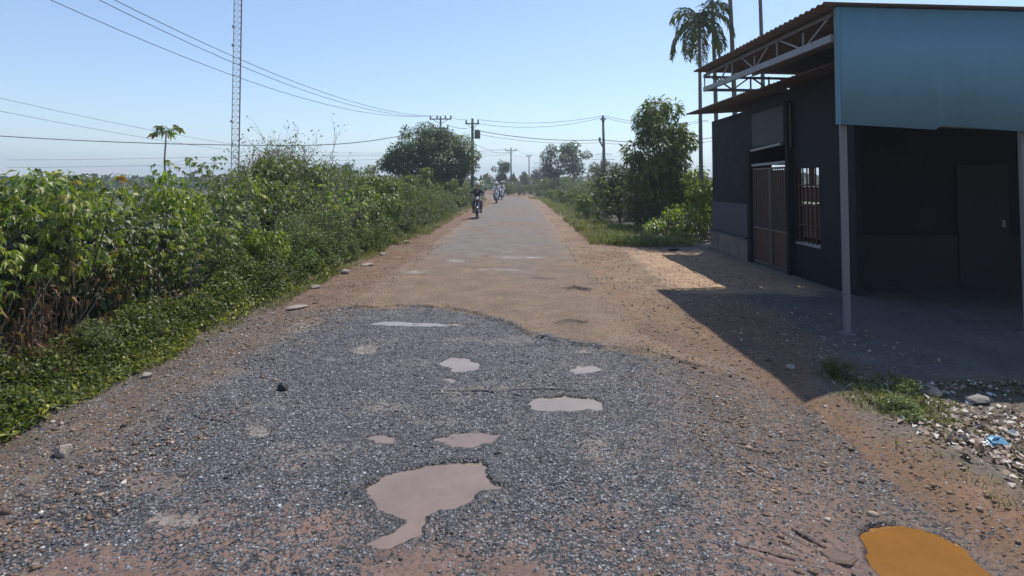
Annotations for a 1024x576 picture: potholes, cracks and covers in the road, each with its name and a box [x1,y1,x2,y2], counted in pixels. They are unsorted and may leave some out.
pothole [353,453,522,557]
crack [418,387,576,399]
pothole [558,285,595,293]
pothole [516,392,613,416]
pothole [842,517,992,576]
pothole [360,430,408,448]
pothole [432,355,489,375]
pothole [547,318,593,326]
pothole [423,427,512,452]
pothole [562,362,608,377]
